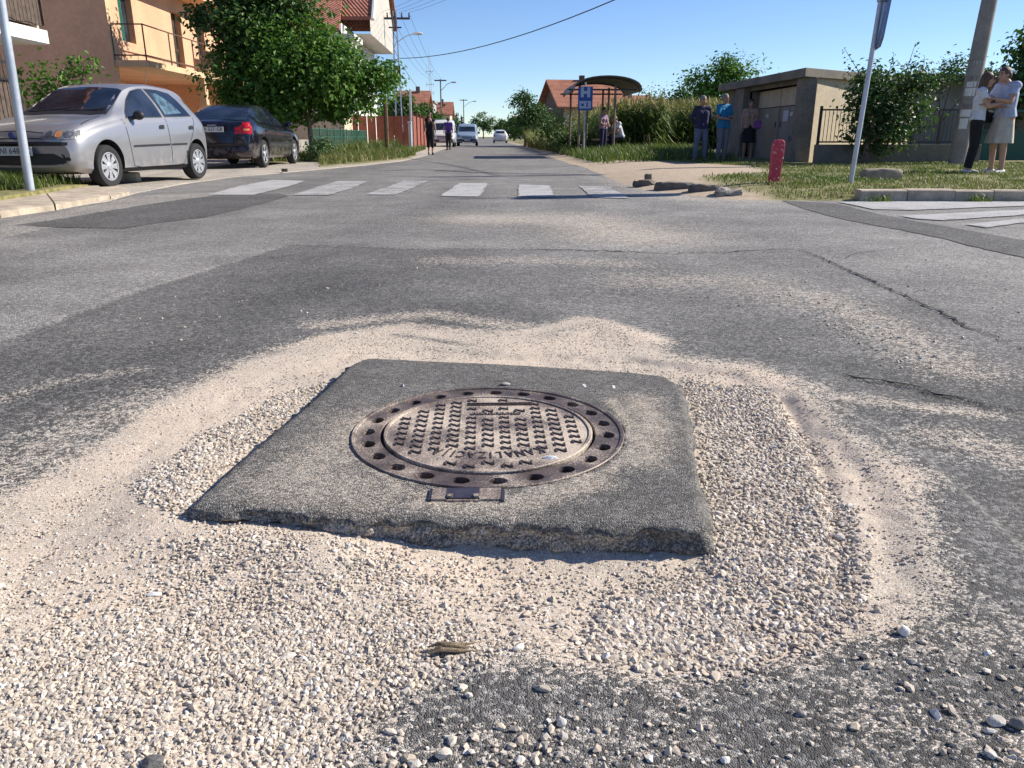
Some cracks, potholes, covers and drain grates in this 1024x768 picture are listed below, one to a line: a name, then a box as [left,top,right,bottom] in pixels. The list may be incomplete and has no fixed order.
crack [843,373,978,404]
crack [809,246,1022,346]
manhole cover [351,387,624,502]
pothole [0,344,941,768]
